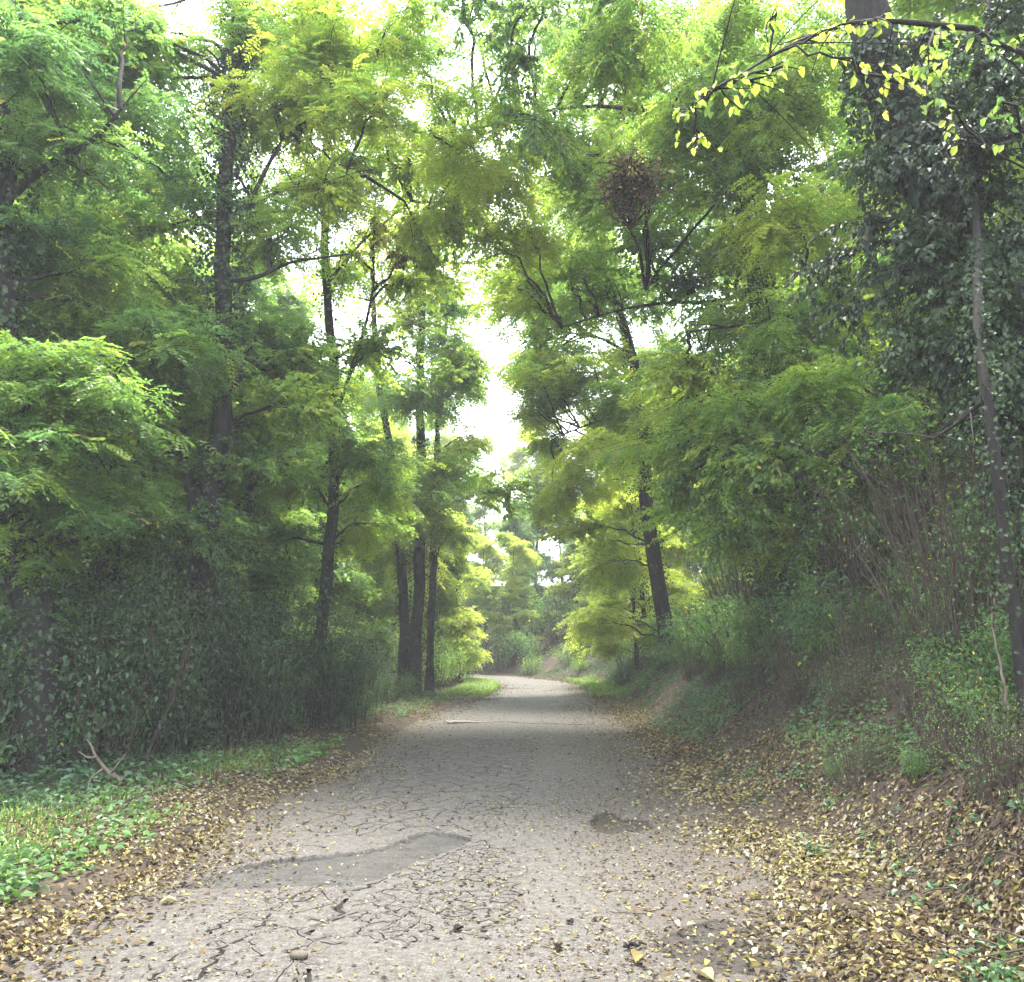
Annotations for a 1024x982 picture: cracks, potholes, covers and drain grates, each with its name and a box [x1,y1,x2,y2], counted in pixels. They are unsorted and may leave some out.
pothole [583,811,661,835]
crack [148,721,619,982]
